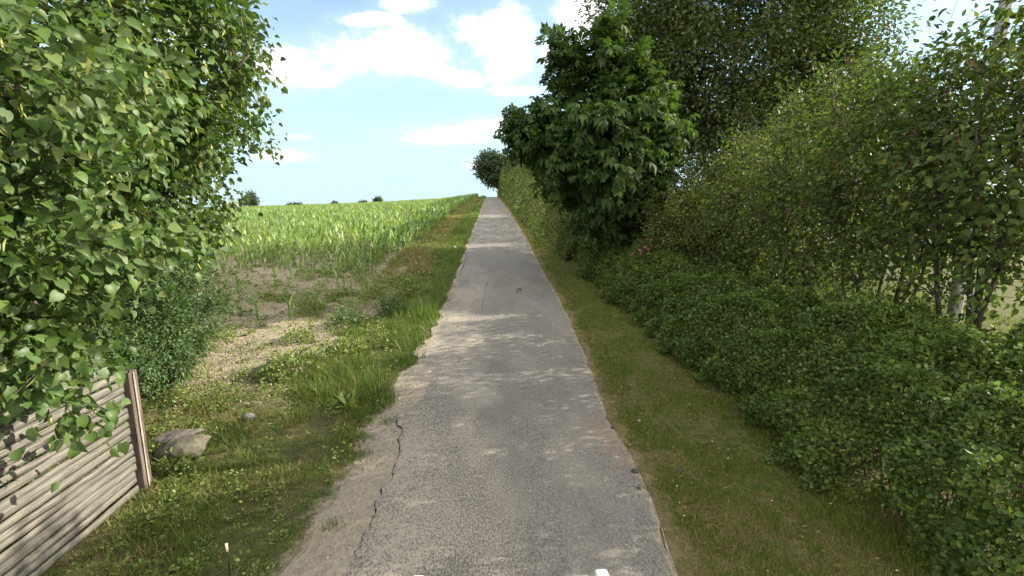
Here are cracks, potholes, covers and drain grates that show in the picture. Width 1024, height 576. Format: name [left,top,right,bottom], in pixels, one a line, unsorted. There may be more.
crack [353,404,418,556]
